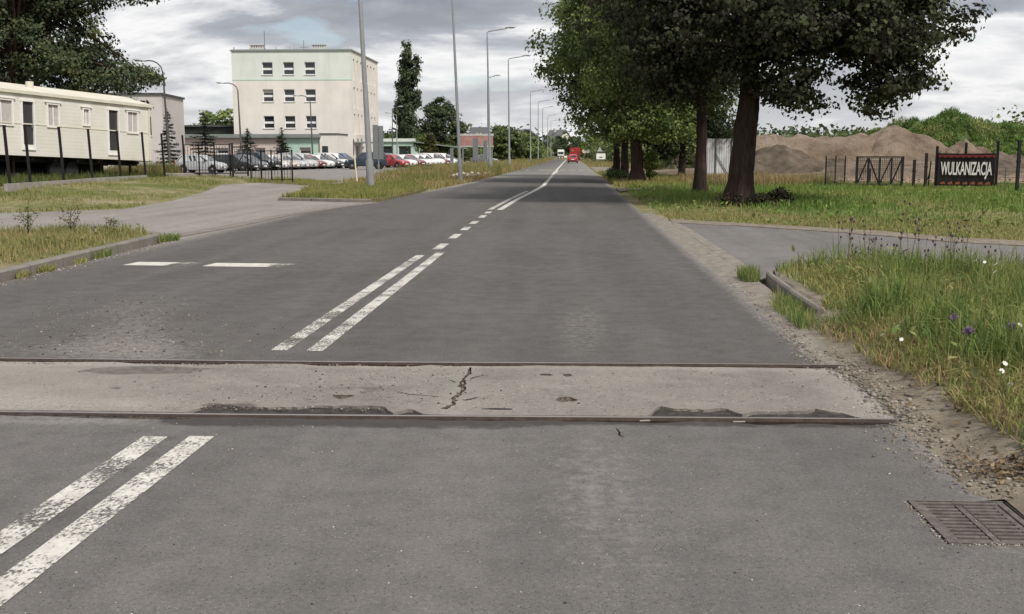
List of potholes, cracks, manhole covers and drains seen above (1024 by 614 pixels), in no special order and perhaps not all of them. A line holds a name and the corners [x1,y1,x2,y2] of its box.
drain grate [908,501,1024,545]
crack [400,368,485,409]
